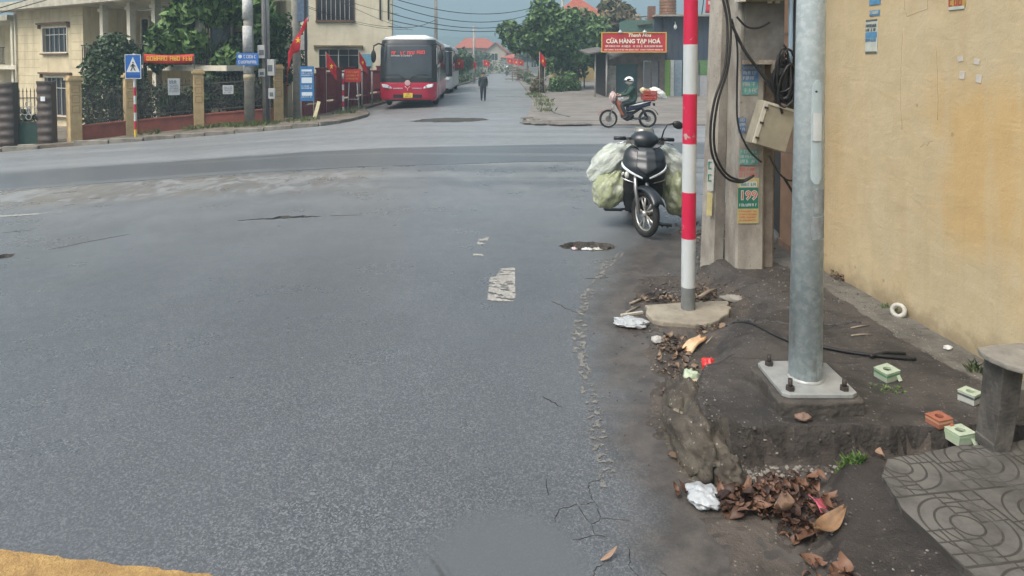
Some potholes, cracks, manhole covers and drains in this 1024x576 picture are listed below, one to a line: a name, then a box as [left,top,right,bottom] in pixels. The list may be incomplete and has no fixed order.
crack [546,480,666,576]
pothole [559,241,615,251]
